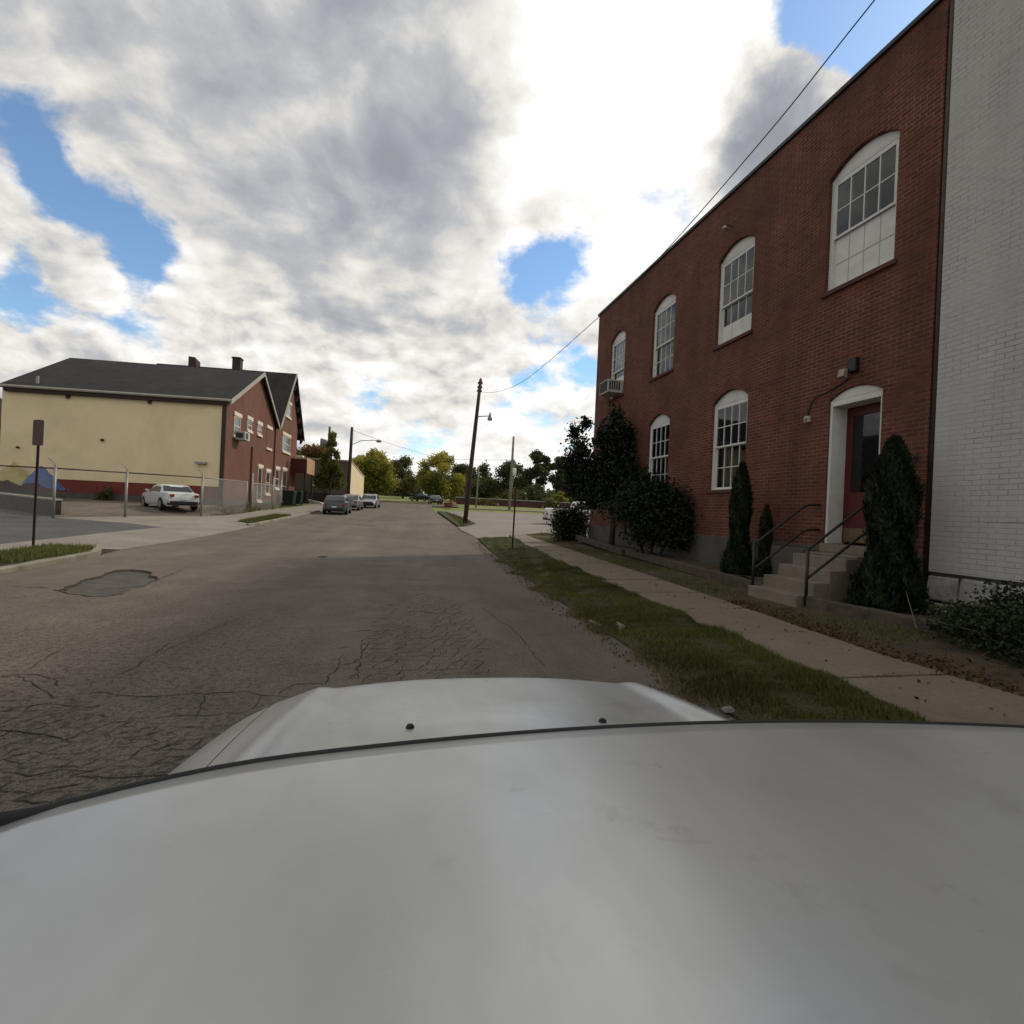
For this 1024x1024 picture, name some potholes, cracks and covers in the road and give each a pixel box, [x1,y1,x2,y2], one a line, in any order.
pothole [59,569,158,596]
crack [0,594,487,806]
